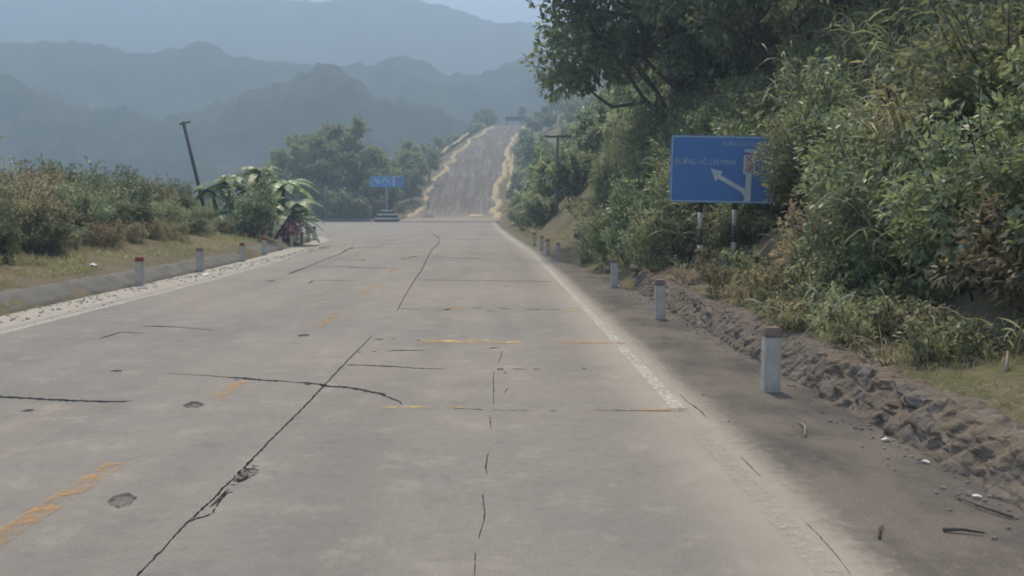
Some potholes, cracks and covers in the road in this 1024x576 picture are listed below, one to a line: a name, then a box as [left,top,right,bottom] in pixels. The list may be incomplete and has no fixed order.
crack [100,326,214,339]
crack [0,395,130,403]
crack [682,396,850,573]
crack [289,240,481,284]
crack [474,347,508,576]
pothole [233,467,259,483]
pothole [107,492,137,509]
